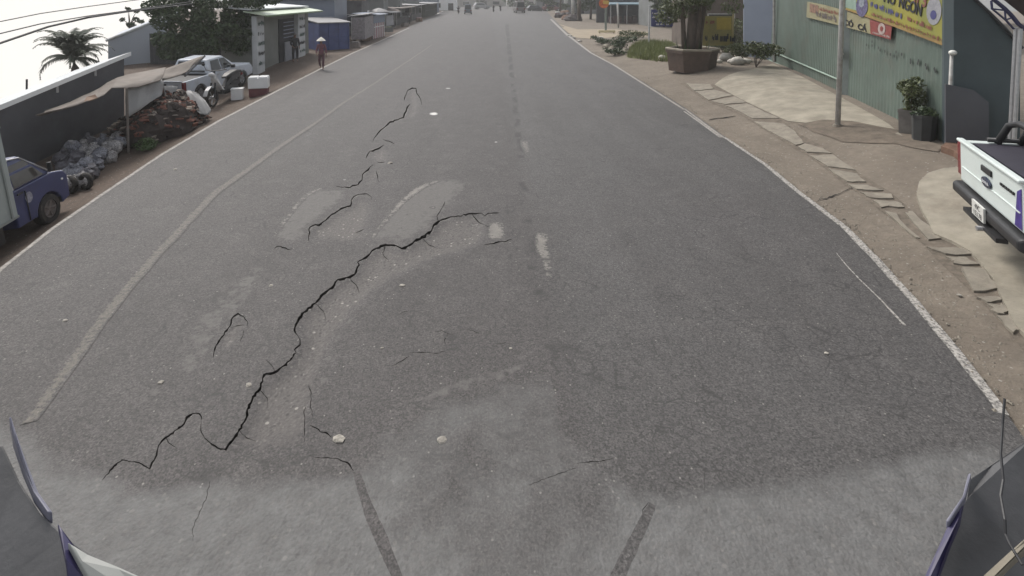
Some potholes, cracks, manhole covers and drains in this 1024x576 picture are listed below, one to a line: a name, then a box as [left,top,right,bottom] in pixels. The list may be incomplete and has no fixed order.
crack [103,88,511,537]
crack [530,458,614,485]
